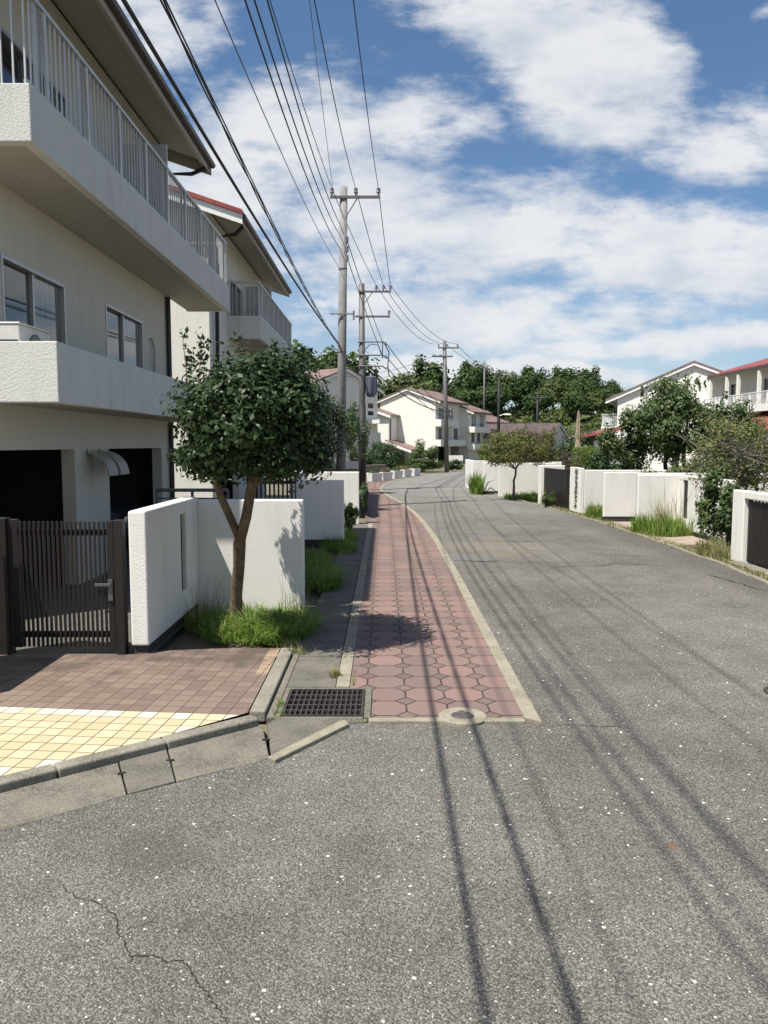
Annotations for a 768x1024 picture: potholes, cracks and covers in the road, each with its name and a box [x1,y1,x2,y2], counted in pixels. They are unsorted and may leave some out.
drain grate [281,689,365,719]
crack [63,887,228,1024]
manhole cover [439,707,487,727]
